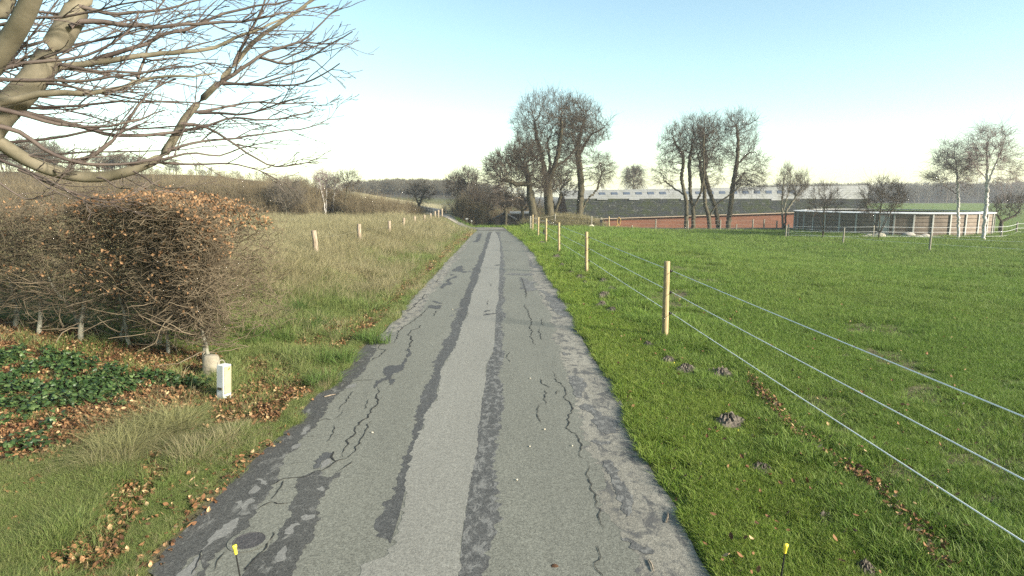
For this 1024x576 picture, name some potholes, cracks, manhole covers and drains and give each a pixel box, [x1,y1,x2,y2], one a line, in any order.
crack [259,379,380,508]
crack [537,371,604,528]
crack [371,280,438,361]
